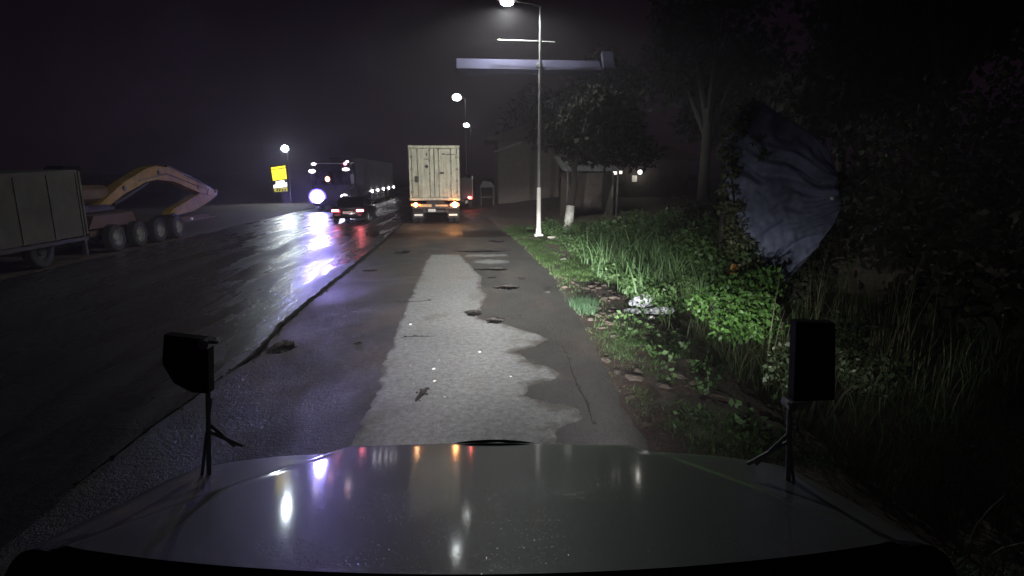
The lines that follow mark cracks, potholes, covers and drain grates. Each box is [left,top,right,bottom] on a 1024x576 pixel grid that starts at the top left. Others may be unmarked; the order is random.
pothole [464,309,482,317]
pothole [265,340,297,354]
crack [561,347,597,424]
